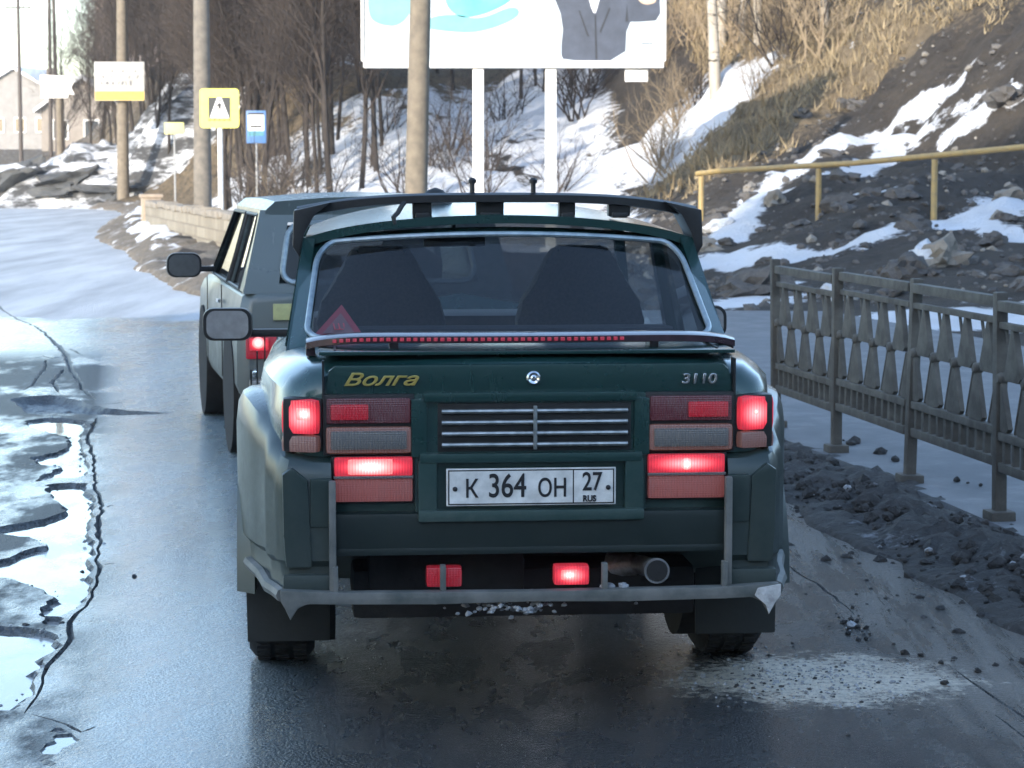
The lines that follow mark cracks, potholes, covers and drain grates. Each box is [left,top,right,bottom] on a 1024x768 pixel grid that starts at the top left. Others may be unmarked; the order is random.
pothole [24,418,90,482]
pothole [0,626,63,710]
crack [956,670,1024,738]
pothole [0,482,96,626]
pothole [37,726,79,766]
crack [790,566,854,614]
crack [0,306,133,733]
